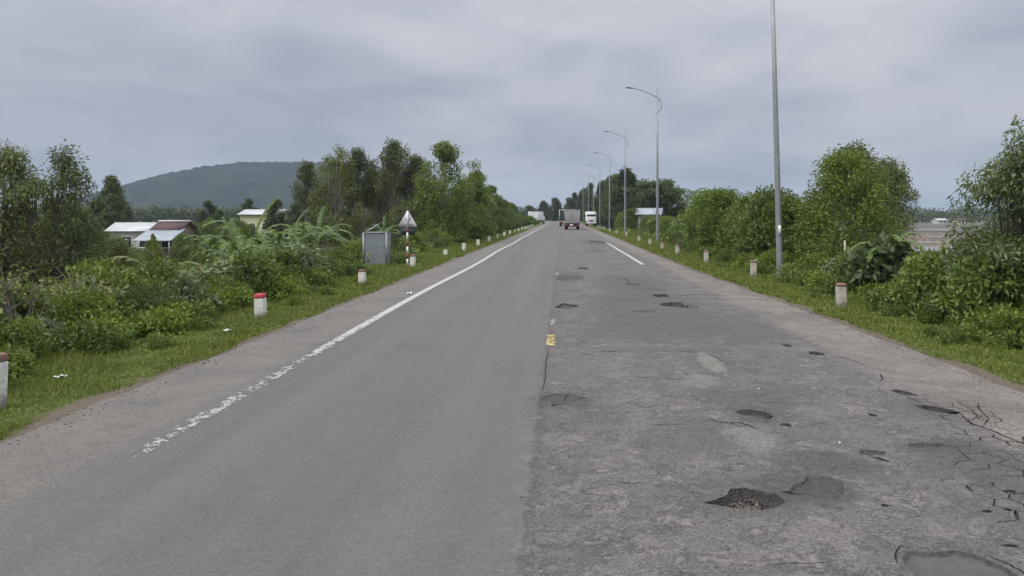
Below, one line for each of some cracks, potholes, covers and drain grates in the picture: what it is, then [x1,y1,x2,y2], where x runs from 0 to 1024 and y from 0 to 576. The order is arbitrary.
pothole [913,404,966,414]
pothole [902,550,1018,576]
pothole [736,409,773,420]
pothole [540,393,588,406]
pothole [703,487,785,510]
crack [907,396,1024,523]
crack [709,419,759,430]
